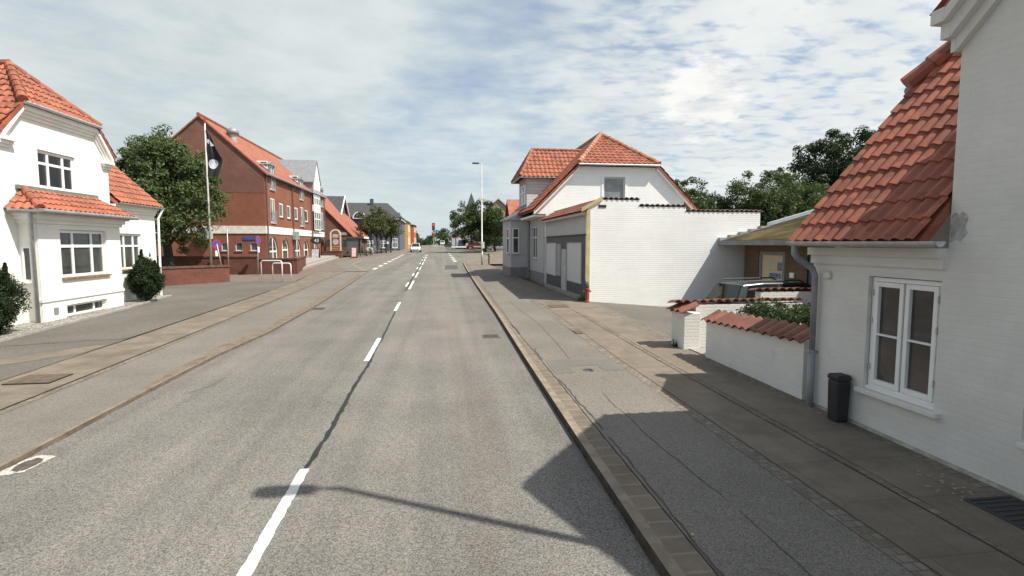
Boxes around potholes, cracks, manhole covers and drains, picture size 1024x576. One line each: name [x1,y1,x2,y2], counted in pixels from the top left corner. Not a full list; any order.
manhole cover [1,373,73,385]
